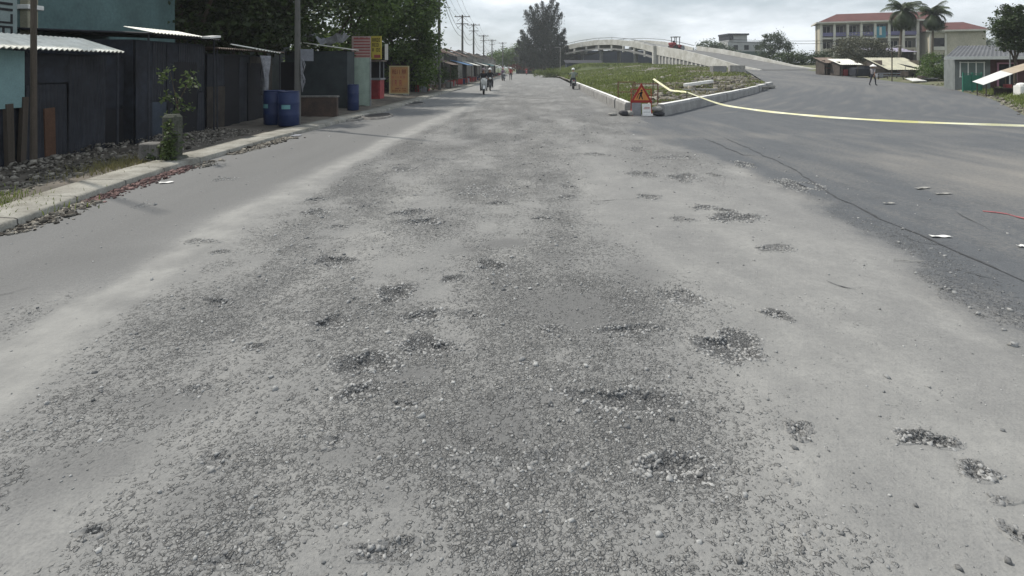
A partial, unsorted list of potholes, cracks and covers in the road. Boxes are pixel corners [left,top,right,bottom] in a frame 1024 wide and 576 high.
pothole [580,319,679,339]
pothole [384,329,473,363]
pothole [610,447,747,503]
pothole [955,457,1007,485]
pothole [885,427,968,452]
pothole [668,321,778,376]
pothole [698,209,776,224]
pothole [370,278,426,310]
pothole [777,416,815,443]
pothole [309,345,425,384]
